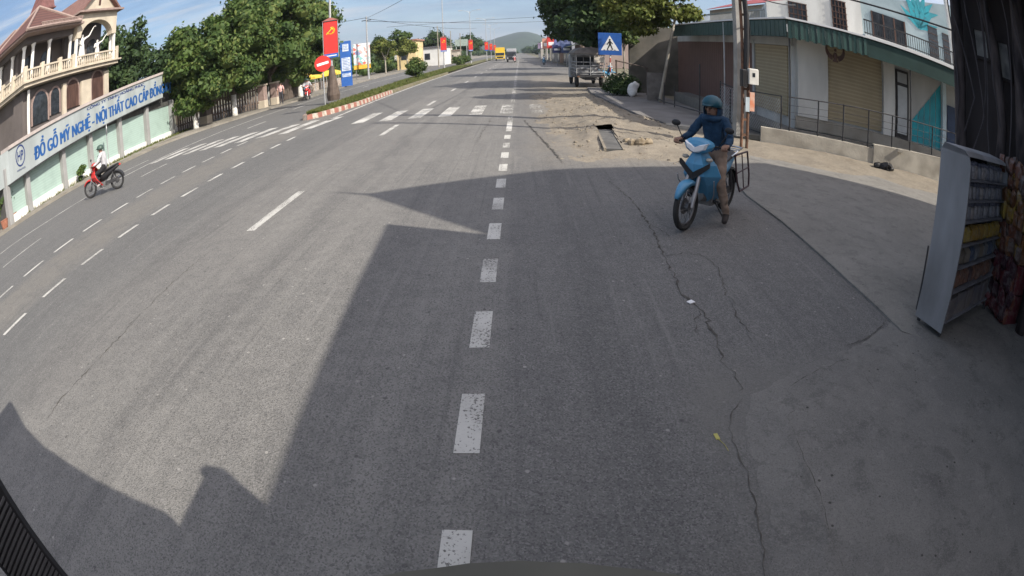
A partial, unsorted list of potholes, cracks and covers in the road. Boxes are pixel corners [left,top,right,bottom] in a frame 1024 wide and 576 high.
crack [609,181,751,390]
crack [794,323,884,384]
